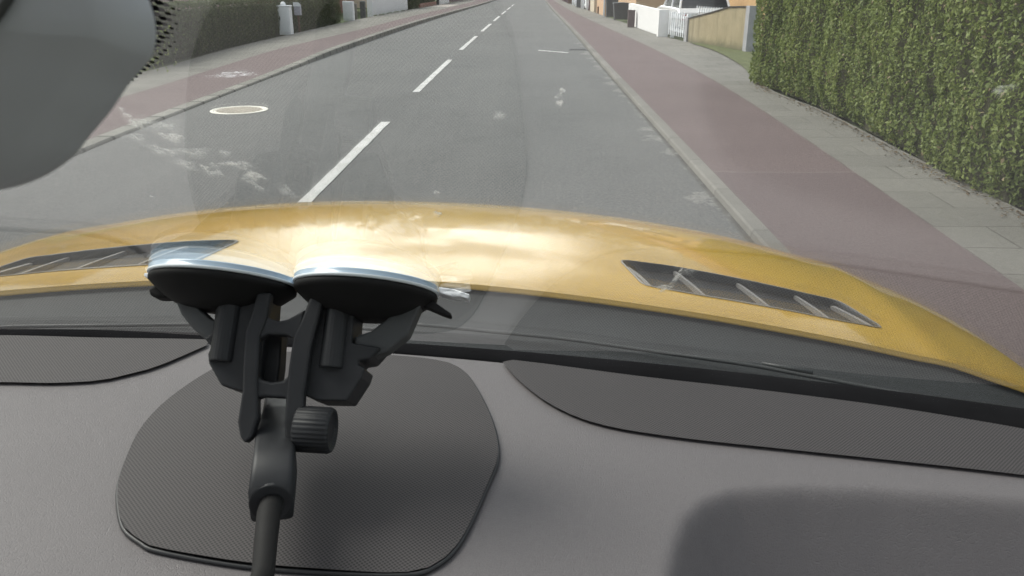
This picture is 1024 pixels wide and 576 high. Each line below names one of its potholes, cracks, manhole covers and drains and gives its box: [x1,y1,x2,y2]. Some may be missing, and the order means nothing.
manhole cover [210,106,268,115]
